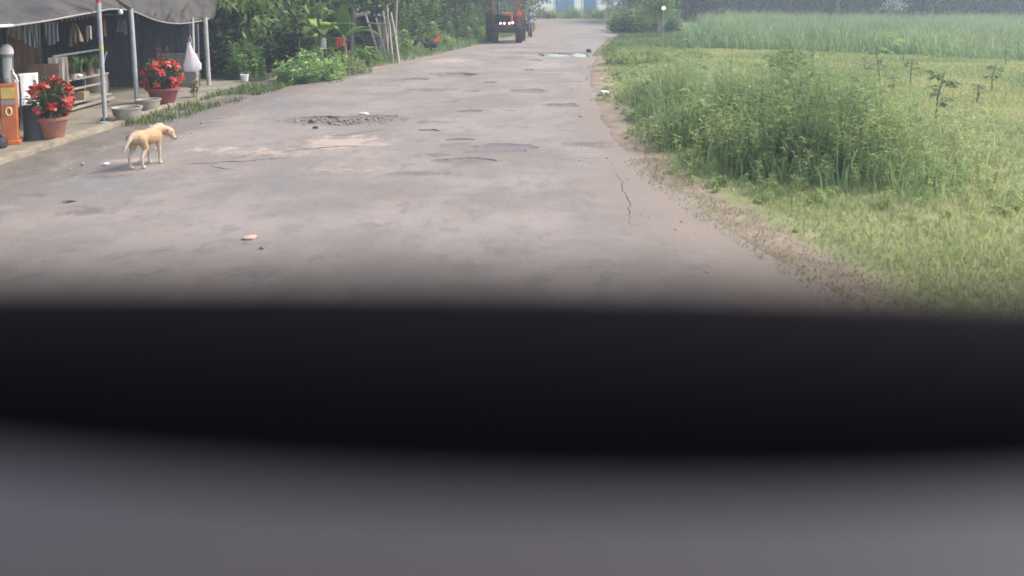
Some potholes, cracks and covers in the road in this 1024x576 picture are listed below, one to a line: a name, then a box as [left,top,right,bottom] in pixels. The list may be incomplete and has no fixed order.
pothole [463,143,540,153]
pothole [274,115,408,126]
